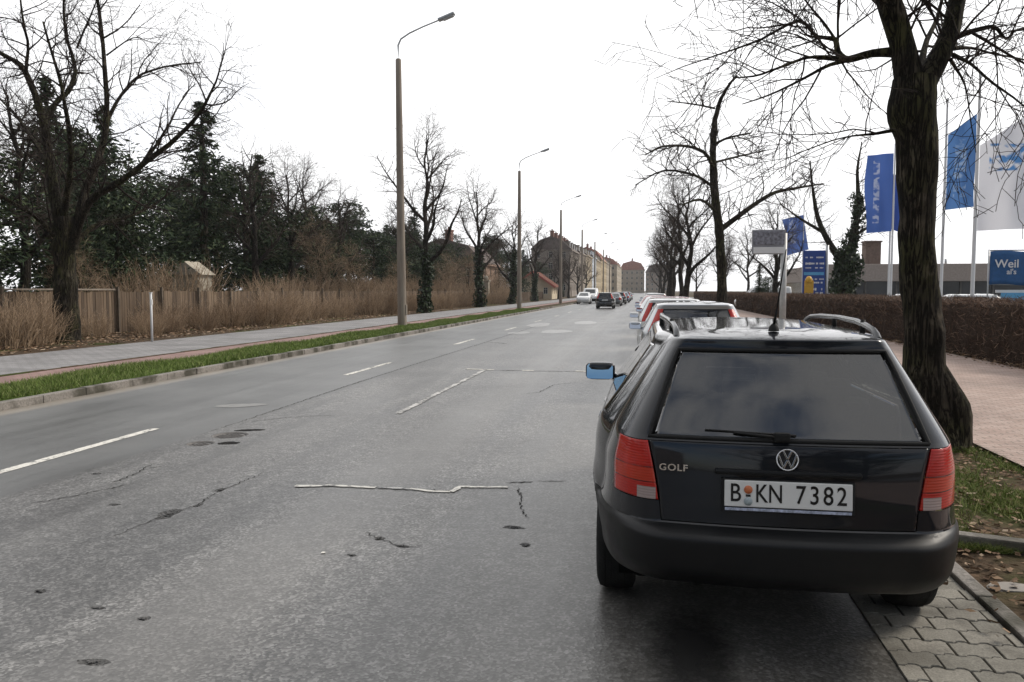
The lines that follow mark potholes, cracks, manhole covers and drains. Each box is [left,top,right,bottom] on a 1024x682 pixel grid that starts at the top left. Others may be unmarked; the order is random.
pothole [155,509,182,520]
